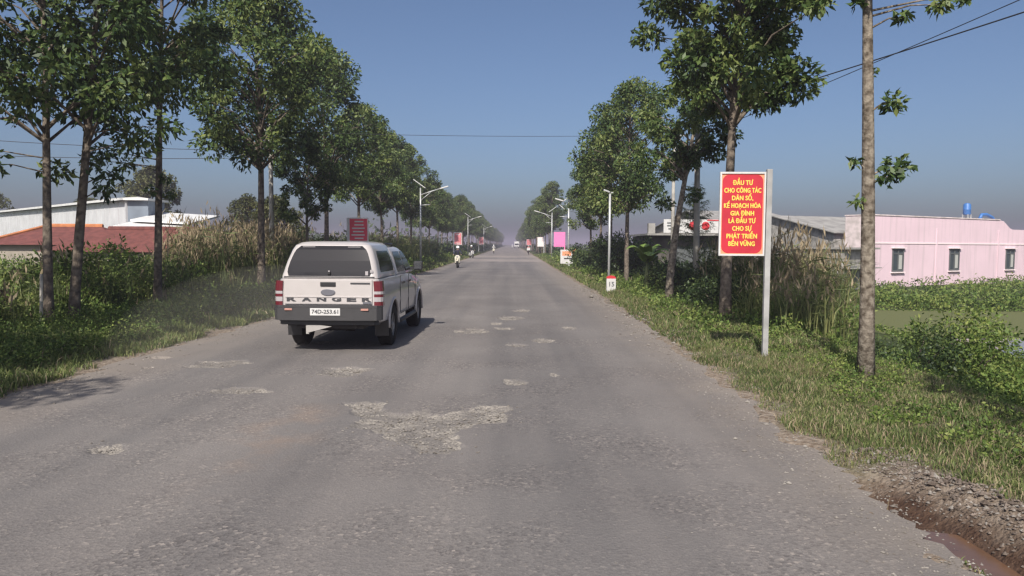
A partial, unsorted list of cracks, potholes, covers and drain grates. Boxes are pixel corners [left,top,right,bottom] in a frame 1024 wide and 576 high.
pothole [338,400,522,459]
pothole [196,387,275,397]
pothole [180,360,254,369]
pothole [78,440,132,455]
pothole [310,367,376,377]
